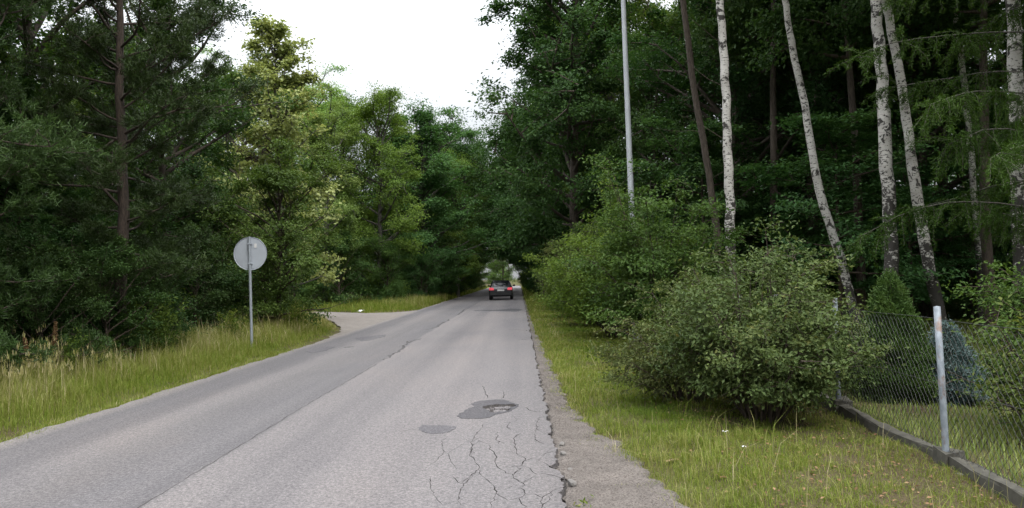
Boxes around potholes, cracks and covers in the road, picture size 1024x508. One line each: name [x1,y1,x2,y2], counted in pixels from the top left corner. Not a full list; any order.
pothole [483,404,516,413]
crack [425,381,568,508]
